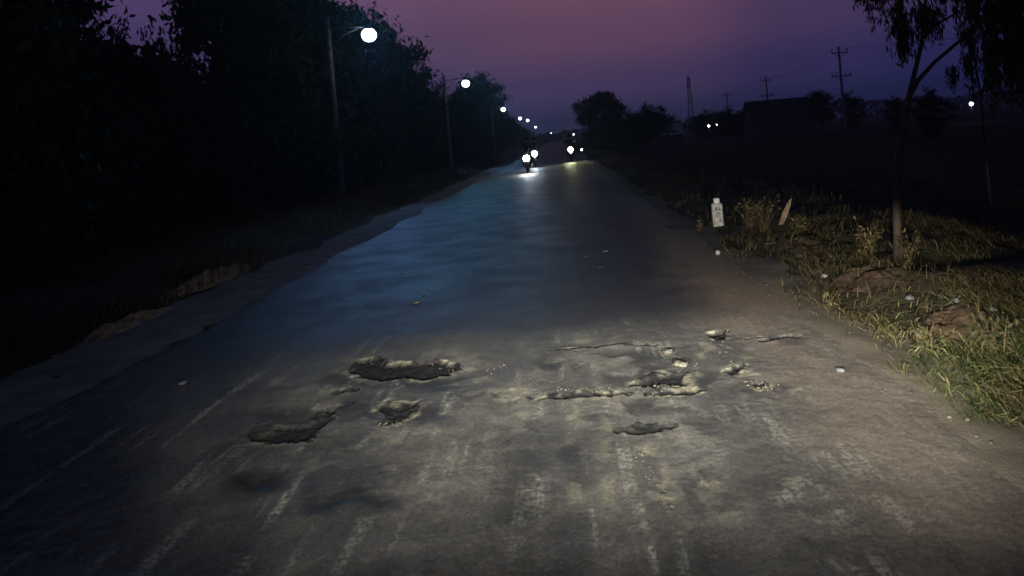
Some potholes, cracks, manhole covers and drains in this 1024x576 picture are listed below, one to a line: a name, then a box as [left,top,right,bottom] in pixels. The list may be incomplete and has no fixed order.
pothole [366,400,423,434]
pothole [612,421,679,435]
pothole [344,356,461,382]
pothole [330,387,360,395]
crack [548,343,659,351]
pothole [246,409,340,446]
pothole [706,330,730,340]
pothole [625,370,693,388]
pothole [525,387,707,401]
